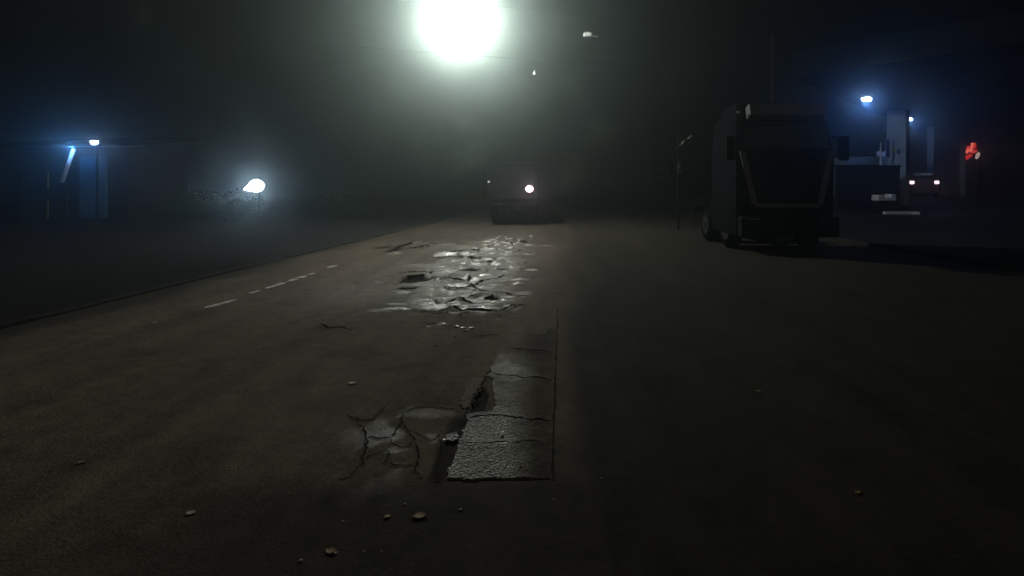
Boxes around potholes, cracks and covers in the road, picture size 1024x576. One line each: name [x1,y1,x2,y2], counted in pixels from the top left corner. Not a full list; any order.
crack [339,241,553,482]
crack [314,323,356,331]
pothole [461,384,493,420]
